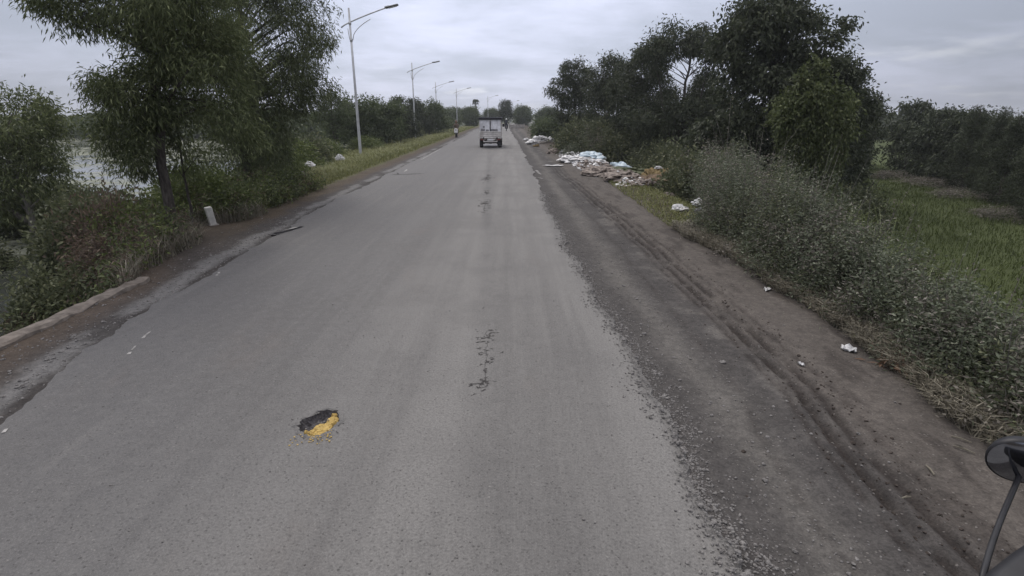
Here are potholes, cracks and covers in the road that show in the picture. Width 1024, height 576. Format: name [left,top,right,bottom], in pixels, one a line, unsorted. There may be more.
crack [469,324,504,395]
pothole [288,407,348,446]
